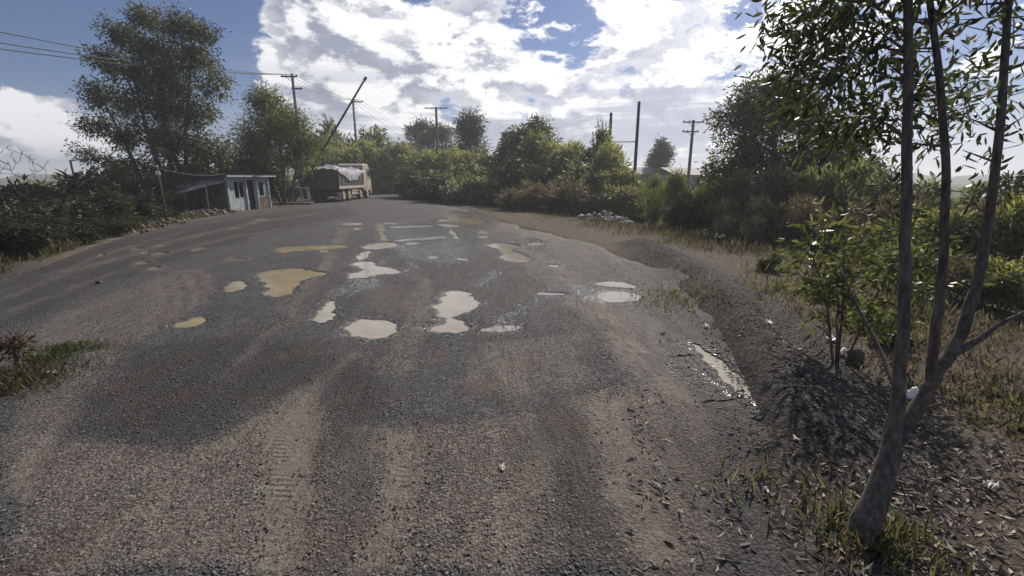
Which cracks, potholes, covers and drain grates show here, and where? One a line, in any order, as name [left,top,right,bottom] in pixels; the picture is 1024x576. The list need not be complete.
pothole [427,290,484,333]
pothole [596,291,642,303]
pothole [594,281,636,289]
pothole [692,343,752,400]
pothole [254,267,329,297]
pothole [346,261,403,279]
pothole [223,280,250,292]
pothole [486,243,533,262]
pothole [341,318,401,339]
pothole [311,300,337,323]
pothole [171,316,208,328]
pothole [273,245,349,253]
